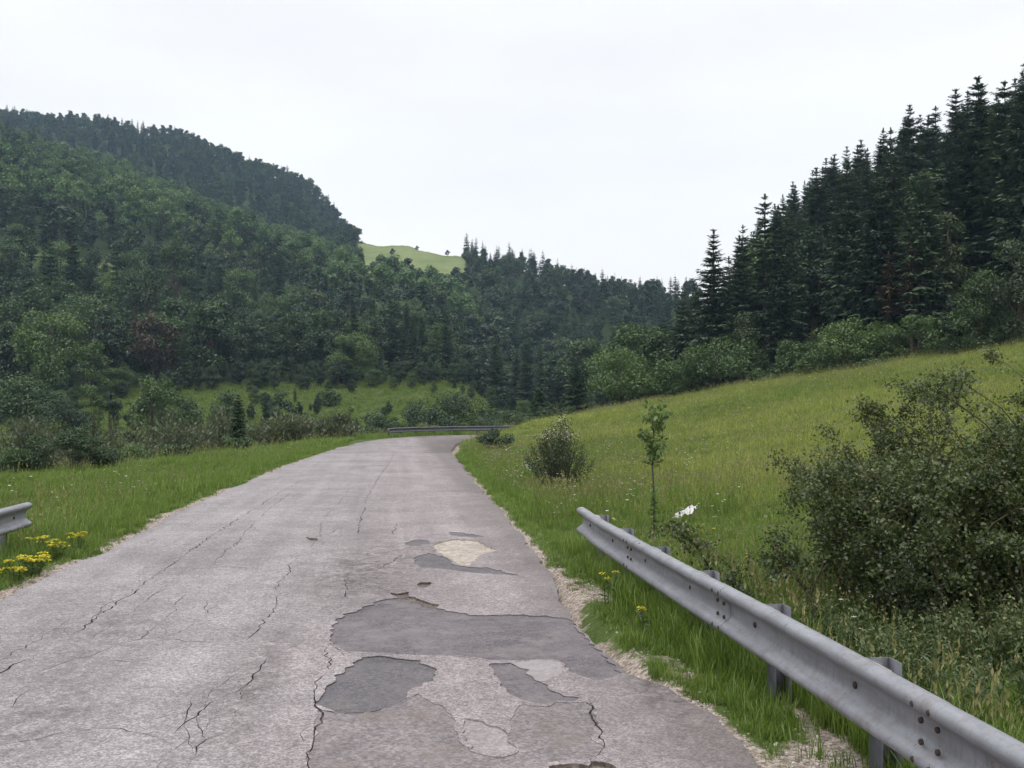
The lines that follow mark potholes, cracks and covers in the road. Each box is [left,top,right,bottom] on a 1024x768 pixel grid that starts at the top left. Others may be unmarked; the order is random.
pothole [390,592,439,609]
crack [581,700,605,762]
crack [286,643,477,768]
crack [0,455,393,673]
crack [157,658,267,767]
crack [3,714,175,746]
